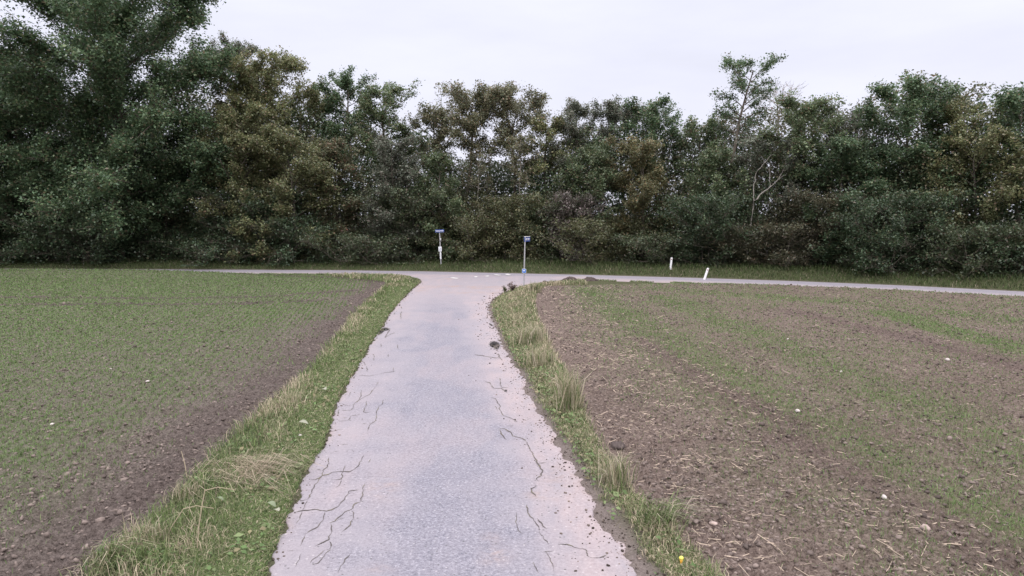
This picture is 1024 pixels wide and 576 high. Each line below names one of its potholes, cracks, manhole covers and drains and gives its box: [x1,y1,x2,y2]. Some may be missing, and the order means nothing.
crack [335,307,402,431]
crack [290,444,371,567]
crack [488,379,607,573]
